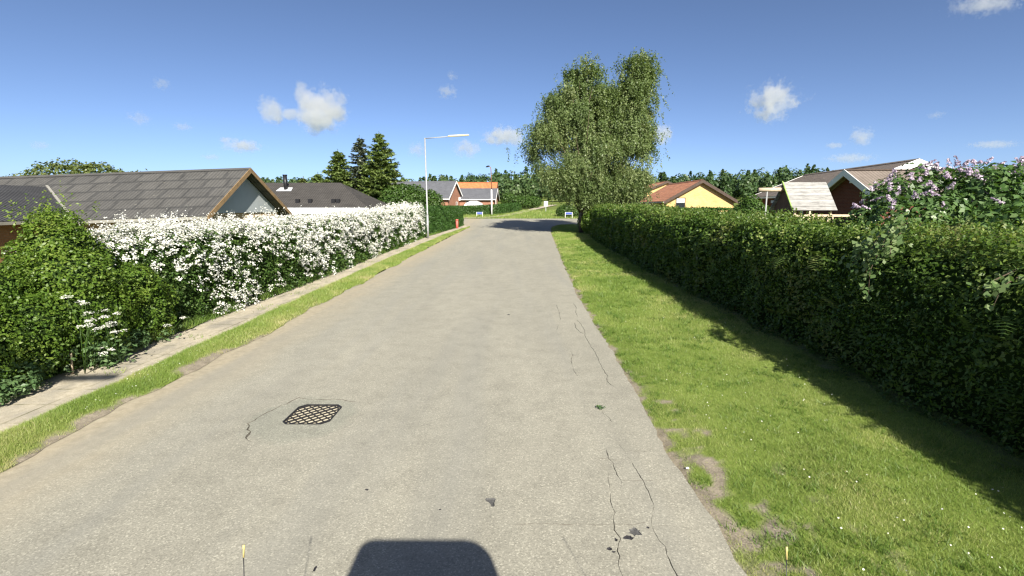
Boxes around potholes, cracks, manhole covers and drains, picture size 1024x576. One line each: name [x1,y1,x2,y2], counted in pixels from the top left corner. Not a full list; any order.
crack [543,446,678,576]
